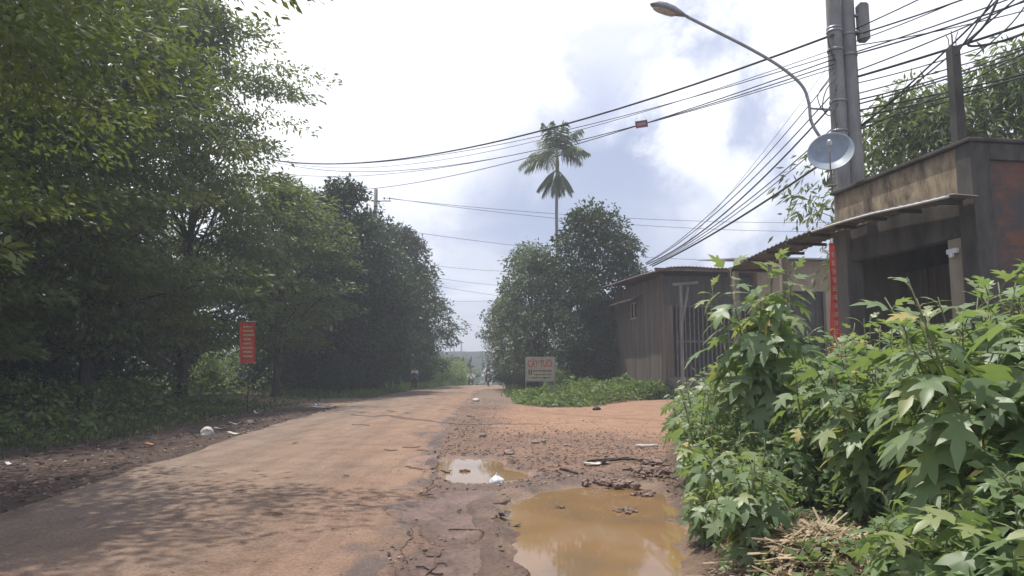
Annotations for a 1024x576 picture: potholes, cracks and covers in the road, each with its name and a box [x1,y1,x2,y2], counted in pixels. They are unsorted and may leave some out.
pothole [465,475,743,576]
pothole [403,452,553,489]
crack [449,529,509,567]
crack [400,528,447,576]
